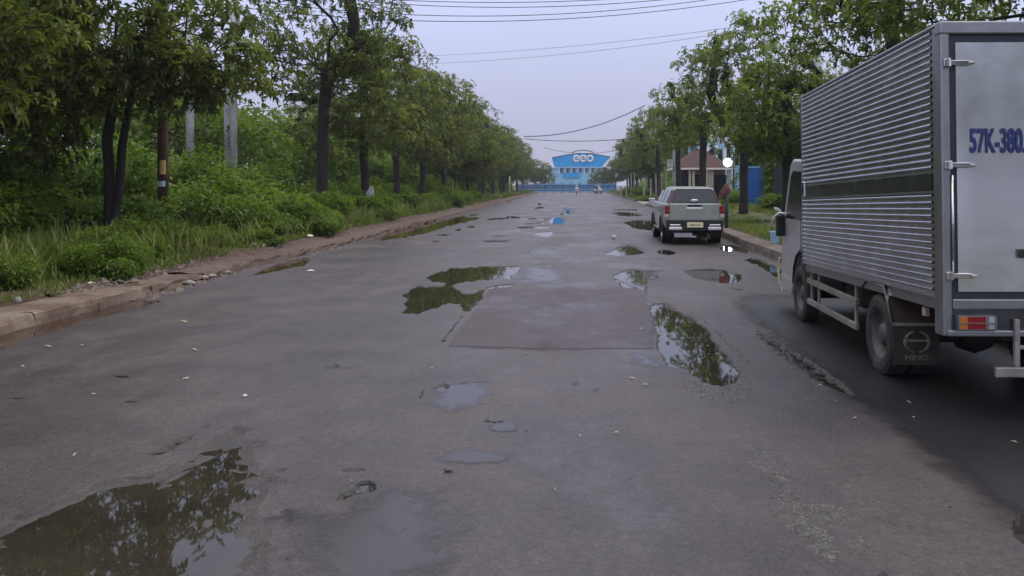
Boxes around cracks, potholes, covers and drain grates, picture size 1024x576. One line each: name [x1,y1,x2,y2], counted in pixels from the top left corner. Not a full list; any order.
pothole [613,268,648,295]
pothole [682,268,743,284]
pothole [401,266,522,314]
pothole [650,302,742,387]
